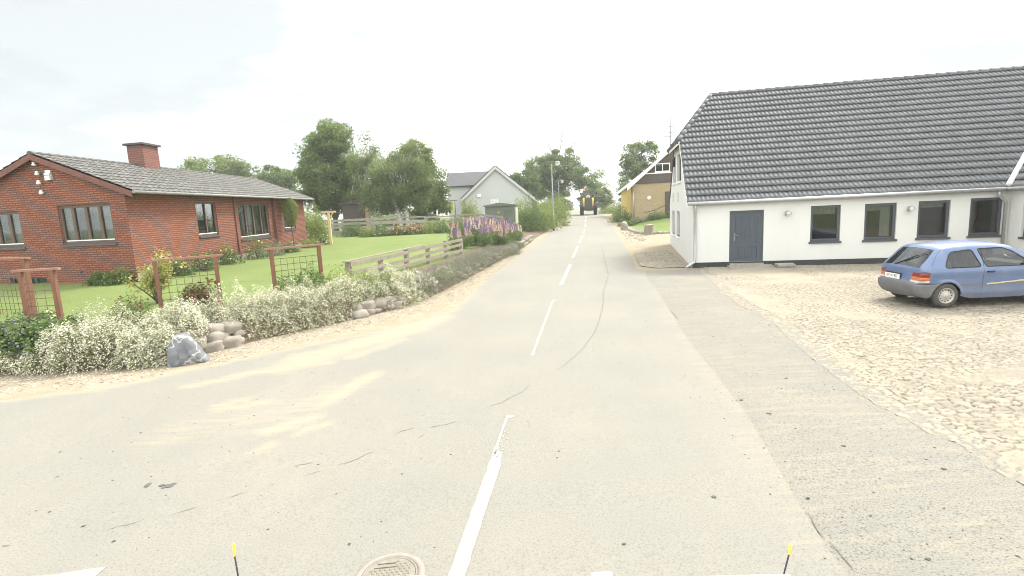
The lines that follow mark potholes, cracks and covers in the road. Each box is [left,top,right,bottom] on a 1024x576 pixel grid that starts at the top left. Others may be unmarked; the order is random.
crack [560,253,609,368]
manhole cover [355,552,425,576]
